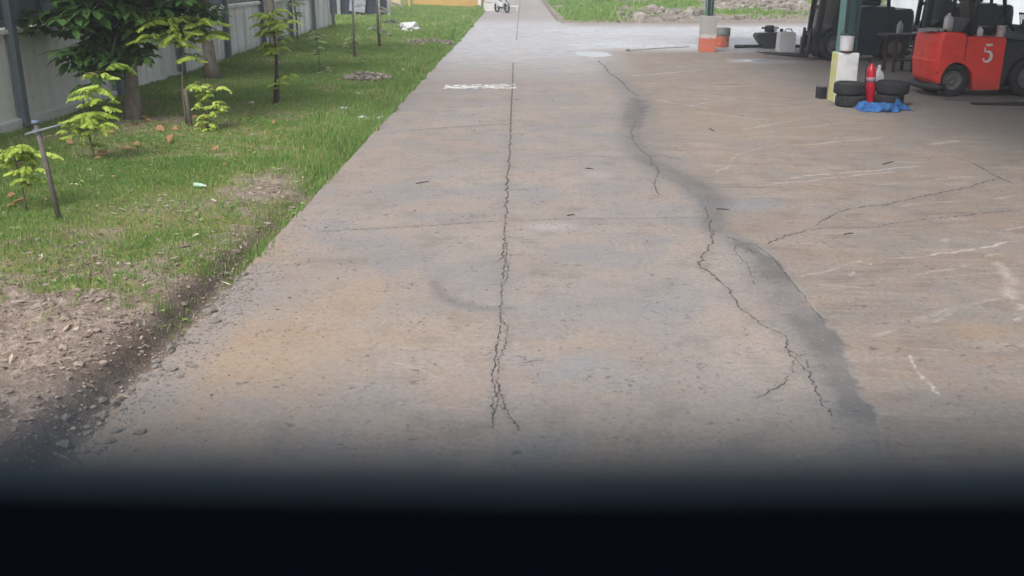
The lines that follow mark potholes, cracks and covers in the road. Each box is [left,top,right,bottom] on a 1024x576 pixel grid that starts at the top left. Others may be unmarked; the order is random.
crack [696,164,1020,417]
crack [550,120,676,194]
crack [407,63,539,425]
